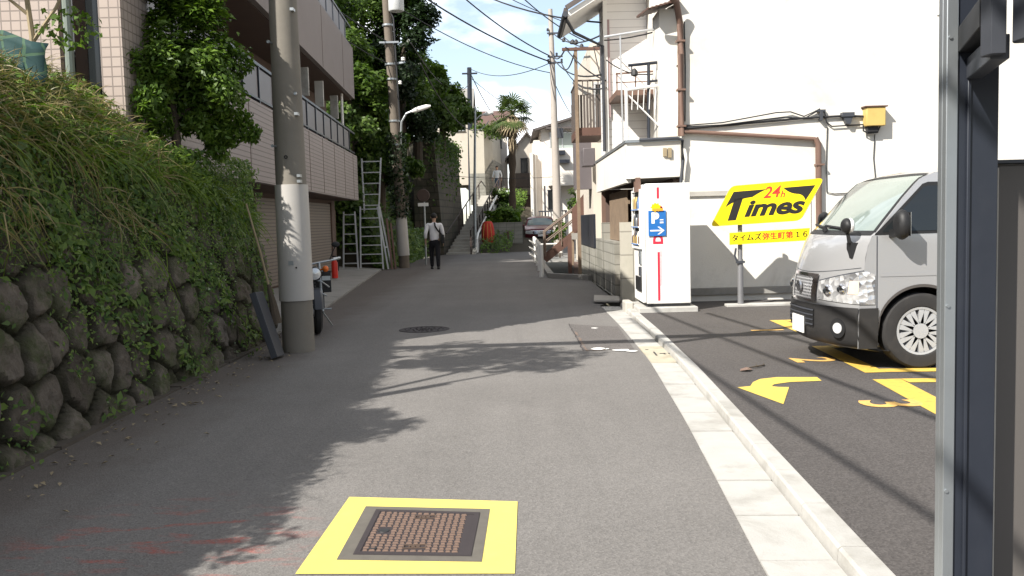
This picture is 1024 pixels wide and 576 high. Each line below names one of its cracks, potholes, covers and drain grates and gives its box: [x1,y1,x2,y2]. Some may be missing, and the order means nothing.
manhole cover [295,497,518,574]
